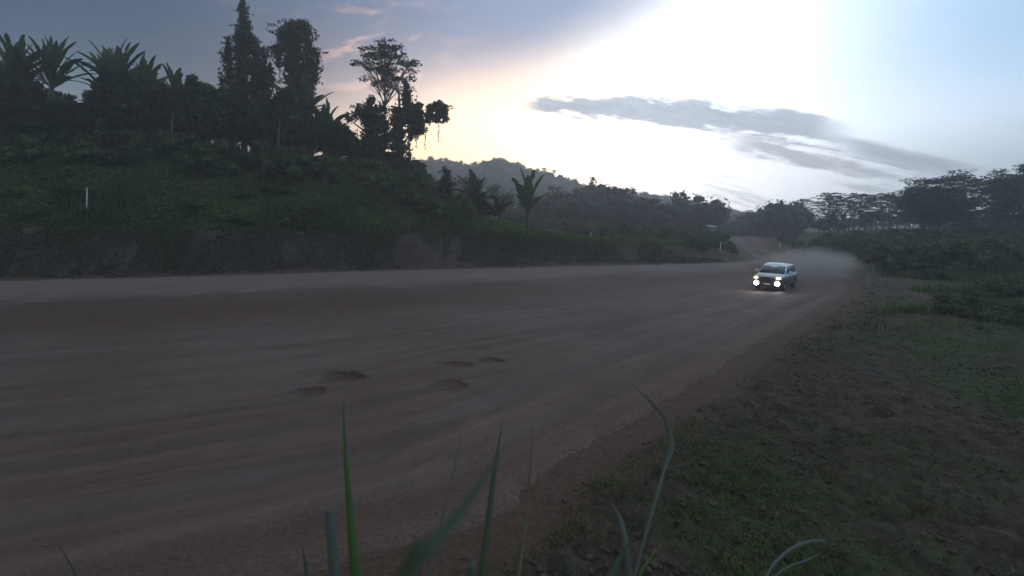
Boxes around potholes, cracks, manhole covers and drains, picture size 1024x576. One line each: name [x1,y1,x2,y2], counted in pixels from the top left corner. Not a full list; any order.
pothole [287,385,330,397]
pothole [316,369,372,384]
pothole [478,356,511,364]
pothole [429,377,473,392]
